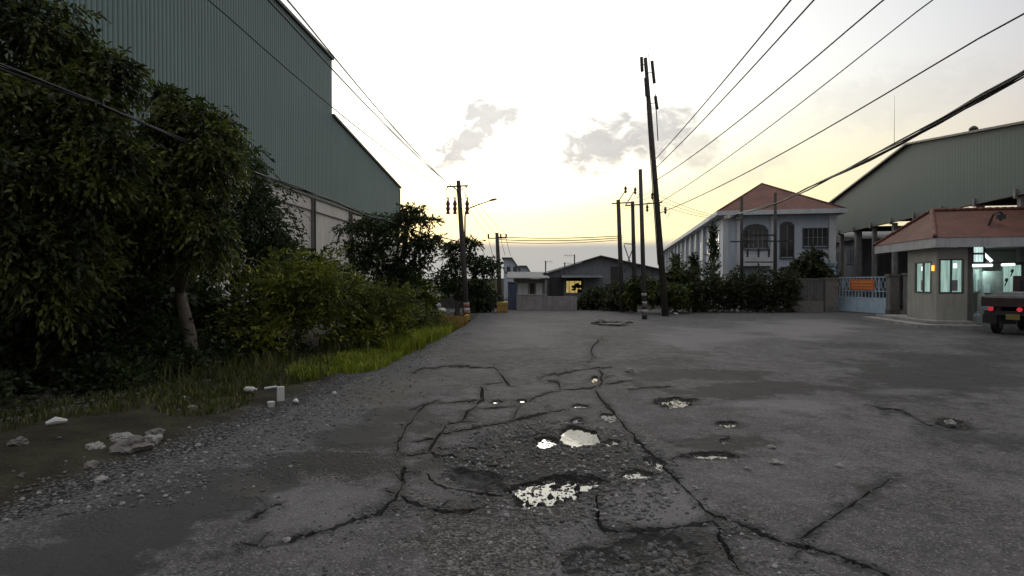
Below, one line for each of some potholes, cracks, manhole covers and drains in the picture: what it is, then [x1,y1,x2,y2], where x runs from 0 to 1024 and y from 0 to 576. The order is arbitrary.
pothole [676,451,740,460]
crack [581,336,605,362]
crack [229,357,979,576]
pothole [508,472,605,509]
pothole [620,469,653,479]
pothole [935,418,973,431]
pothole [558,425,601,447]
pothole [653,397,700,409]
pothole [532,436,559,449]
